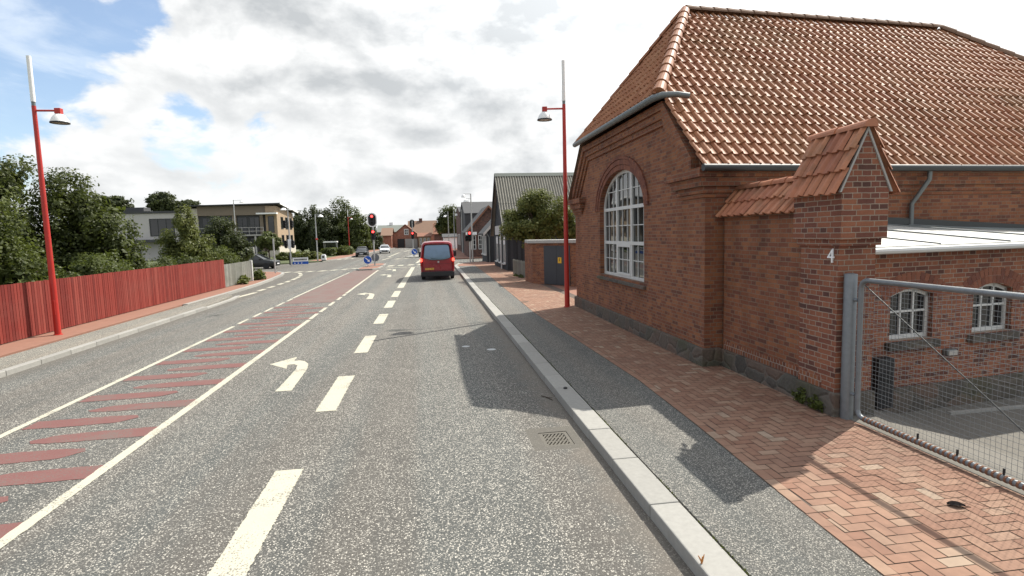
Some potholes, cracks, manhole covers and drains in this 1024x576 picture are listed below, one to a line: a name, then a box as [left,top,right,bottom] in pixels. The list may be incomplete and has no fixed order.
drain grate [538,431,575,446]
